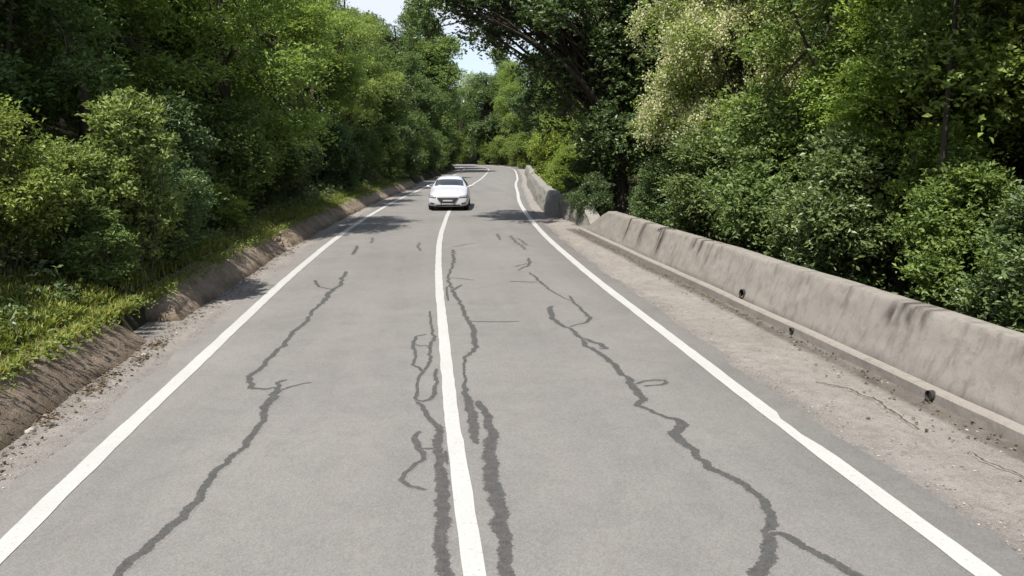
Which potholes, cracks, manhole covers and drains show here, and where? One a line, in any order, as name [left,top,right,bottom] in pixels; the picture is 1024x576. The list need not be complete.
crack [816,381,920,429]
crack [495,234,533,270]
crack [971,451,1024,478]
